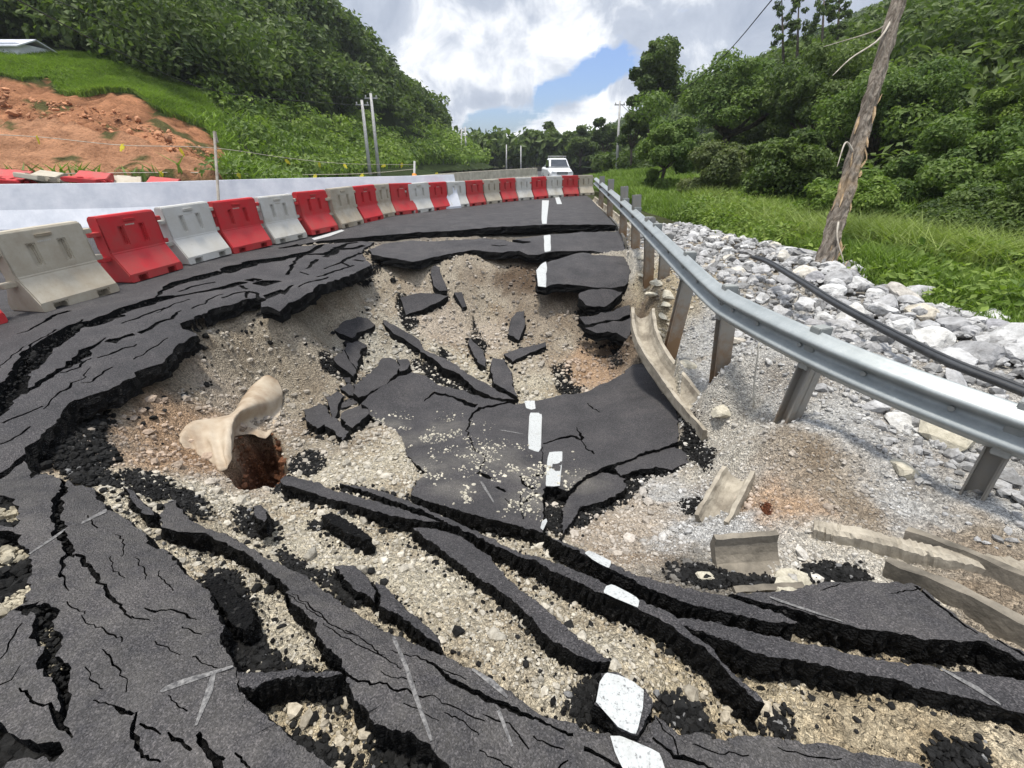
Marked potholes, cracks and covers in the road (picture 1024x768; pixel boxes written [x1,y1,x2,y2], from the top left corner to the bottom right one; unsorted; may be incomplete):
crack [0,242,1024,768]
